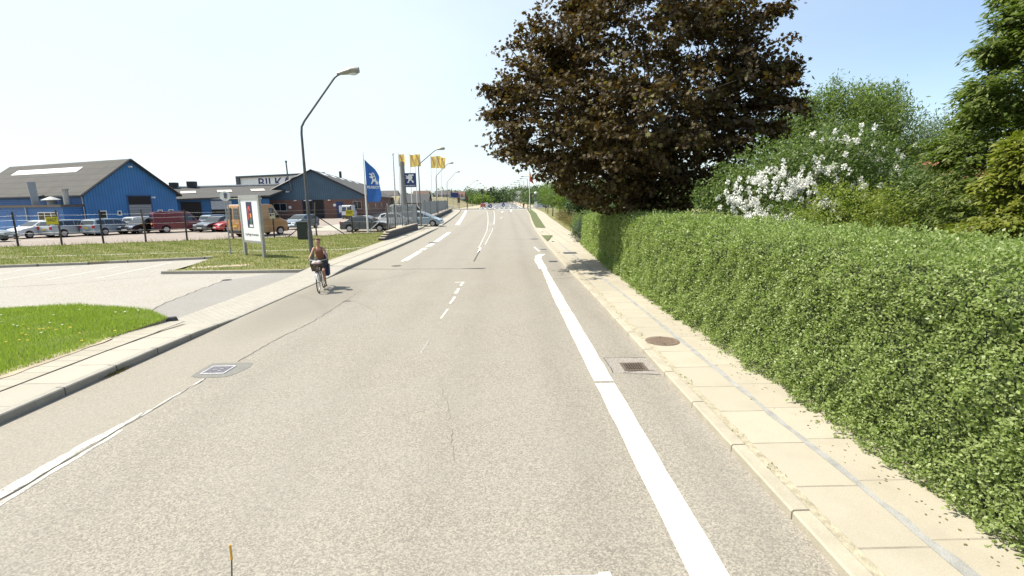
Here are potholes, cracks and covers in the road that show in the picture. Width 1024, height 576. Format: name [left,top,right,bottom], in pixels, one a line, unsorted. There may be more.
manhole cover [200,365,236,374]
drain grate [620,362,649,371]
manhole cover [645,336,680,346]
